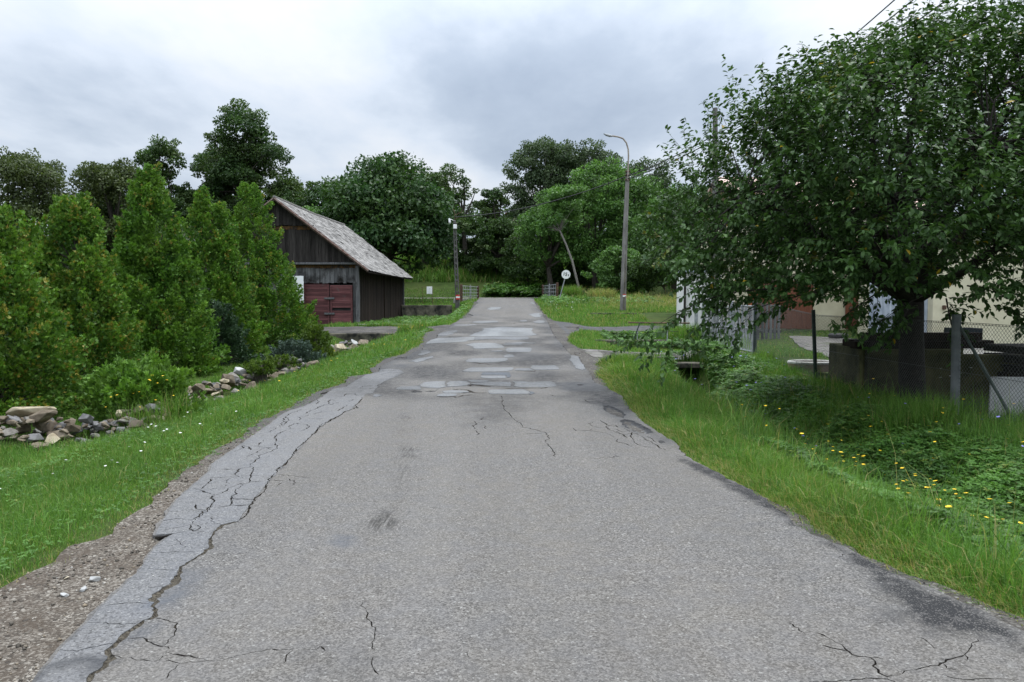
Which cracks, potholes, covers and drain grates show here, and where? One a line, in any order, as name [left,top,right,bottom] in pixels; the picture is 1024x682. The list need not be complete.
crack [790,623,1010,682]
crack [450,385,588,456]
crack [574,420,665,459]
crack [75,384,380,682]
